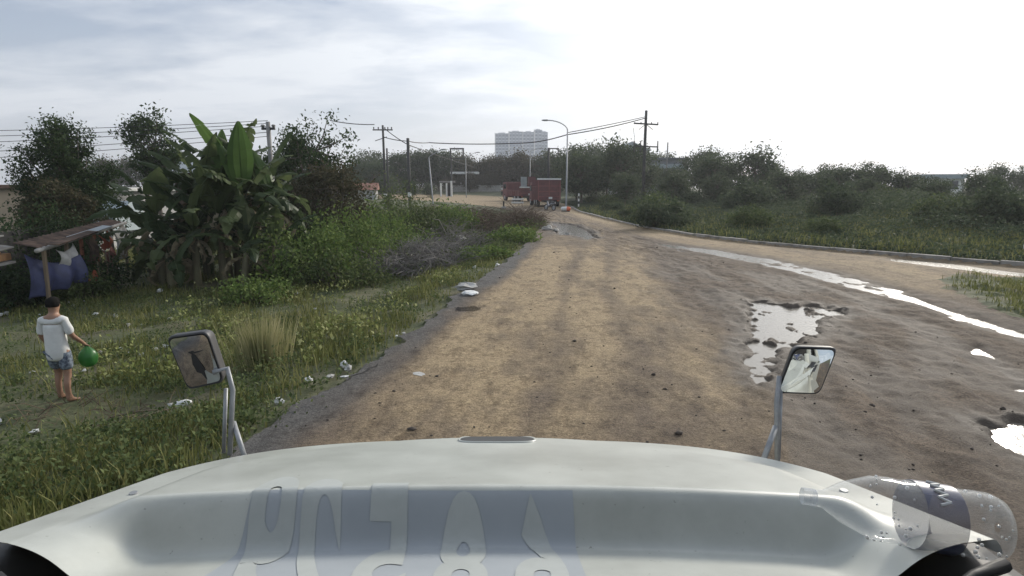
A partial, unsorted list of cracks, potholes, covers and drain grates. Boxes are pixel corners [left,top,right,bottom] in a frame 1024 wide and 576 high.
pothole [550,222,599,239]
pothole [970,412,1024,456]
pothole [736,300,849,385]
